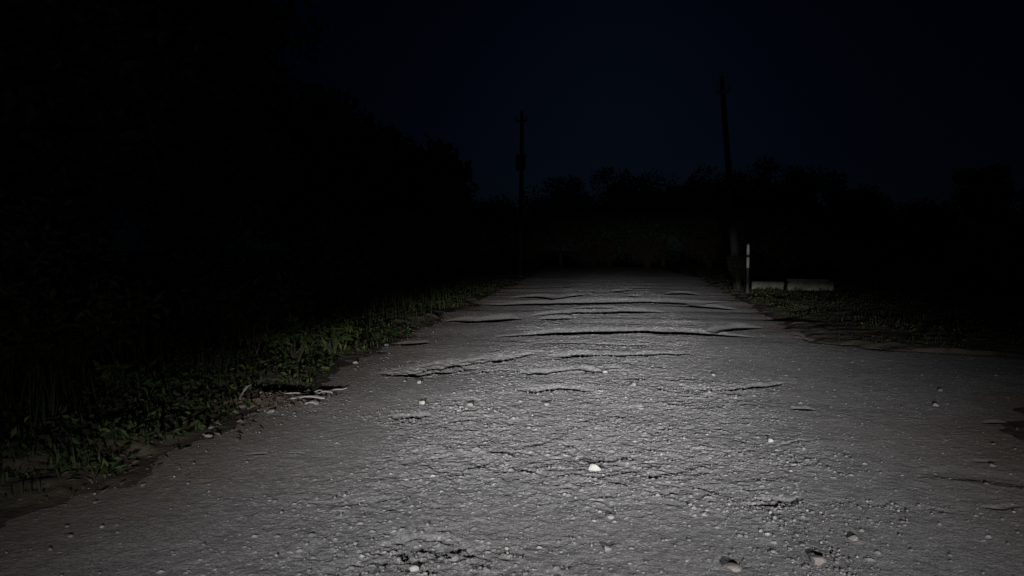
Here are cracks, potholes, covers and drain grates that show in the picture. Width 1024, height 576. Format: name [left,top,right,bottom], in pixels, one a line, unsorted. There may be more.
crack [441,288,765,394]
crack [724,381,817,411]
crack [405,451,471,463]
